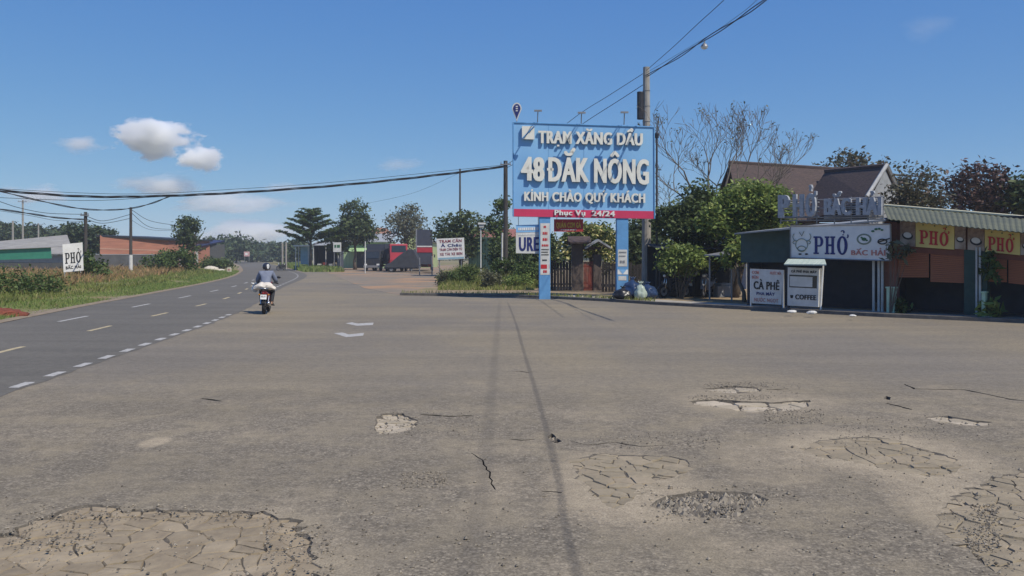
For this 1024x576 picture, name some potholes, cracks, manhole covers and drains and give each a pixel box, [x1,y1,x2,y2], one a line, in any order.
pothole [374,413,418,434]
pothole [705,385,760,393]
crack [886,384,1024,410]
crack [471,439,534,490]
crack [543,441,693,509]
crack [791,436,1024,576]
pothole [651,491,769,518]
pothole [689,399,811,413]
pothole [926,416,991,426]
